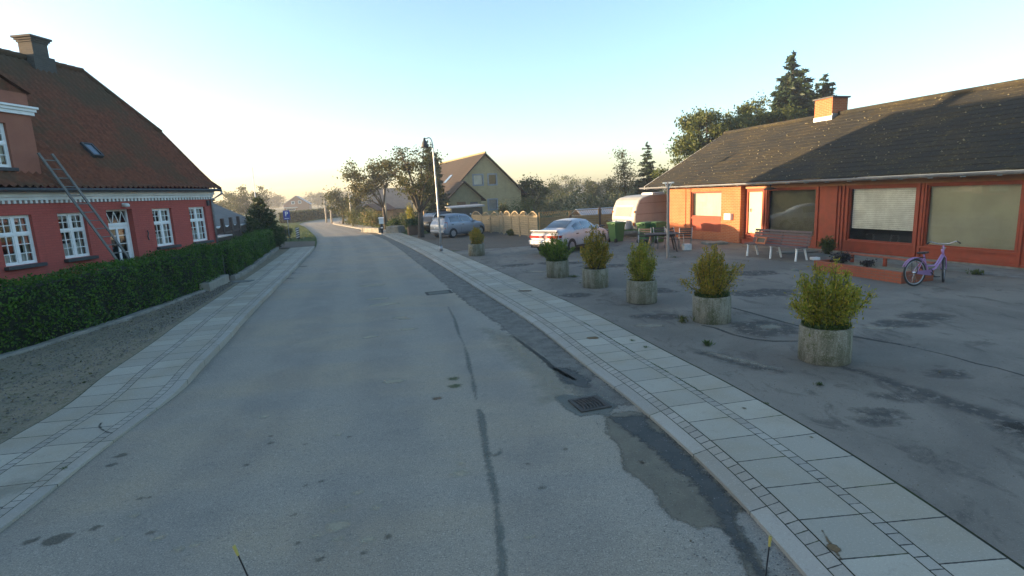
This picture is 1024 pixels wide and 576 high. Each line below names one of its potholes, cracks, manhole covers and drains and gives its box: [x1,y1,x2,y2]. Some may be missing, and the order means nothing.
drain grate [568,395,612,413]
